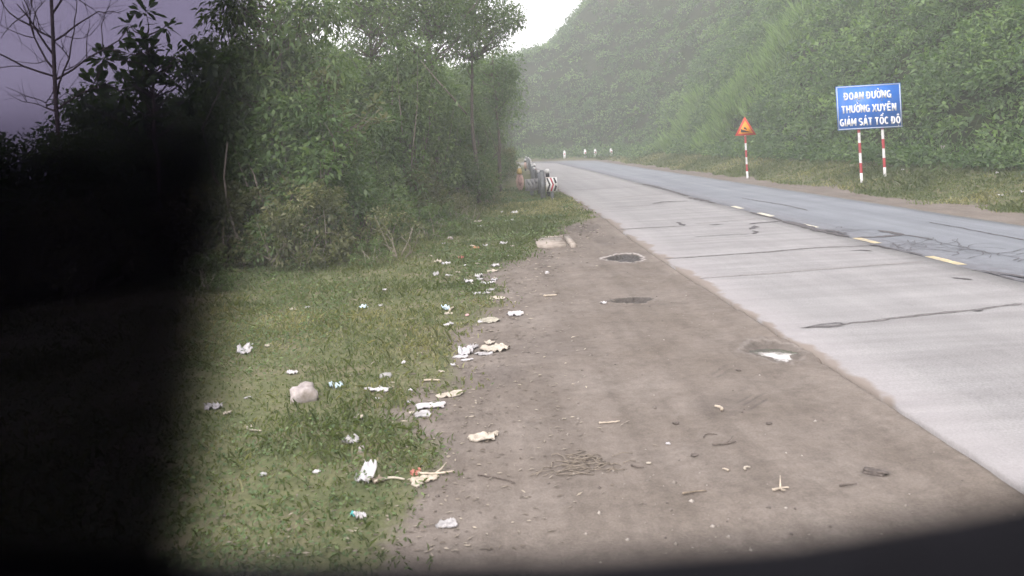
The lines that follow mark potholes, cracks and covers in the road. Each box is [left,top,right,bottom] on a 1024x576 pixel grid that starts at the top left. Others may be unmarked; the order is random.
pothole [598,253,650,264]
pothole [729,336,822,367]
pothole [602,296,665,306]
crack [830,222,1024,262]
